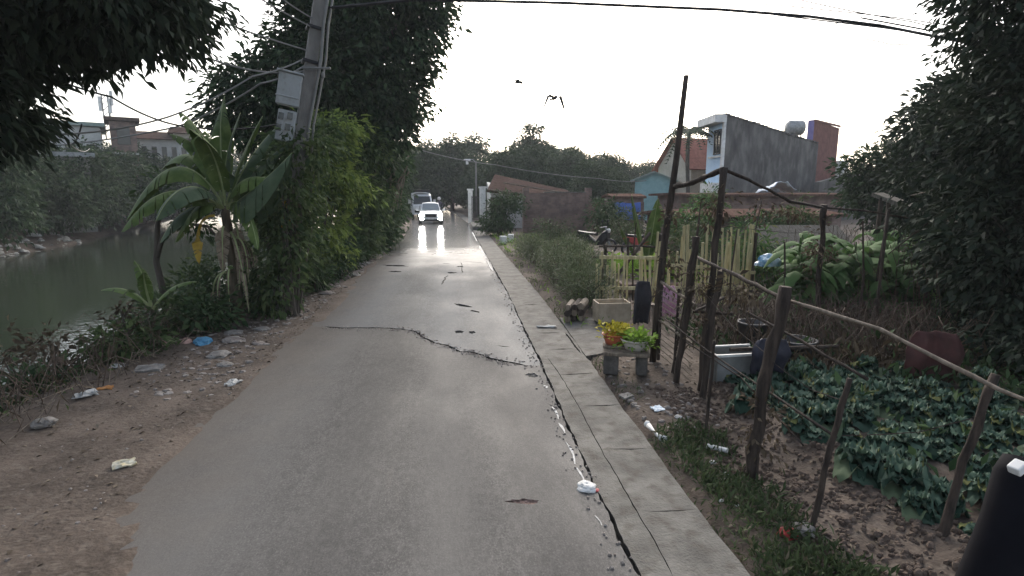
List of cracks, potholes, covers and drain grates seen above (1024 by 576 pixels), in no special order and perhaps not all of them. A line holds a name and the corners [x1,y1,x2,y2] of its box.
crack [329,237,692,576]
